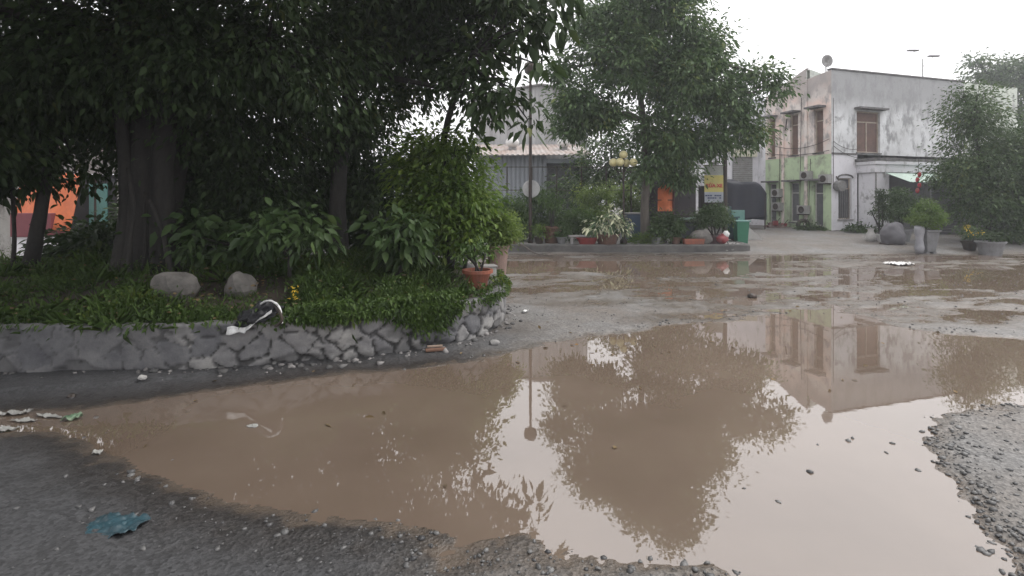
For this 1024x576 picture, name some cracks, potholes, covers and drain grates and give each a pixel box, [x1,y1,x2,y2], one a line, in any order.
pothole [0,312,1024,576]
pothole [900,266,1024,294]
pothole [472,256,807,280]
